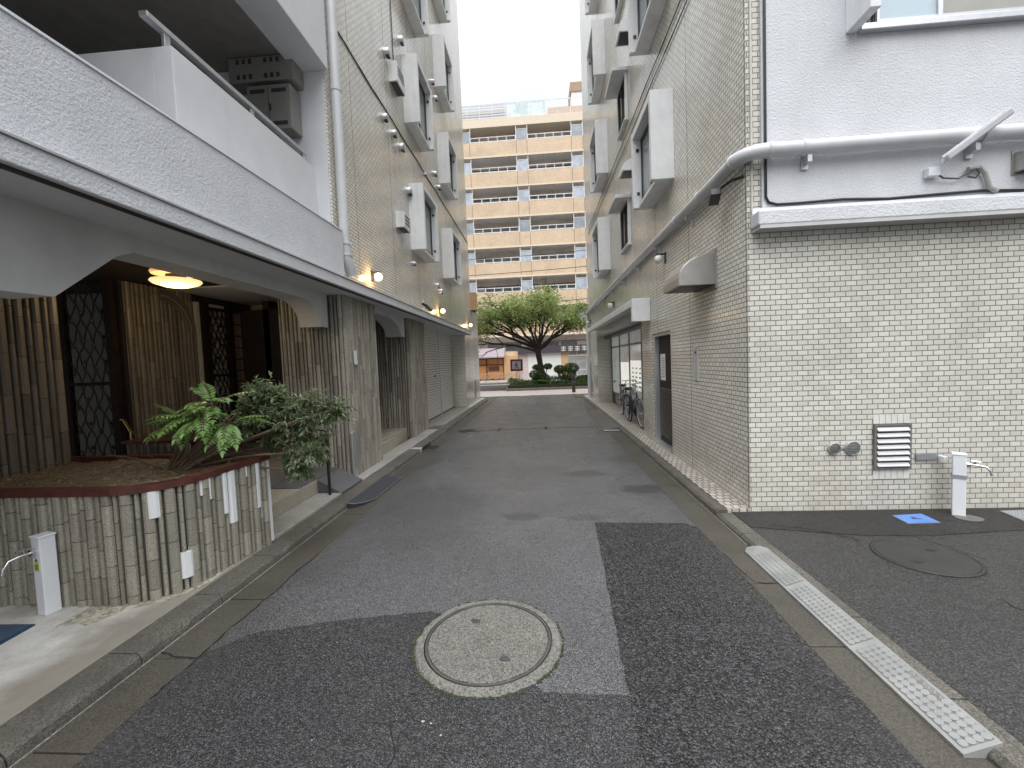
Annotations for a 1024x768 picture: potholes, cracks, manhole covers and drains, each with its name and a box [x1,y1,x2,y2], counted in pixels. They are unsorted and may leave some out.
manhole cover [411,598,564,700]
manhole cover [869,538,988,578]
